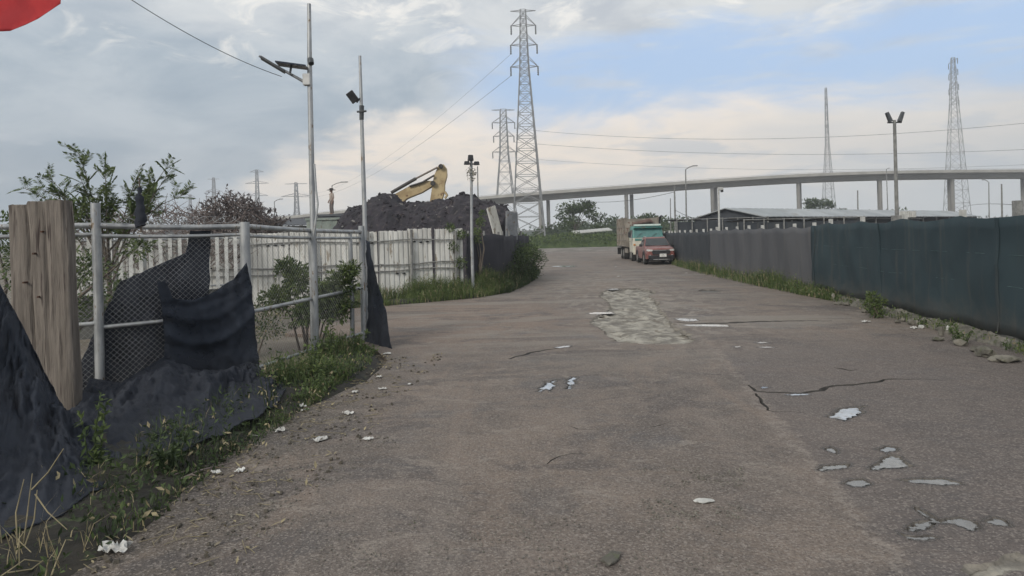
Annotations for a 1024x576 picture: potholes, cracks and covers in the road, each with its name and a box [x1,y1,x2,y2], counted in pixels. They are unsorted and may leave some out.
pothole [984,516,1013,526]
pothole [900,477,963,485]
pothole [826,406,866,421]
pothole [898,532,939,541]
crack [748,368,954,413]
pothole [866,454,913,471]
pothole [536,379,559,392]
pothole [817,463,851,472]
pothole [904,505,982,532]
pothole [841,478,872,487]
